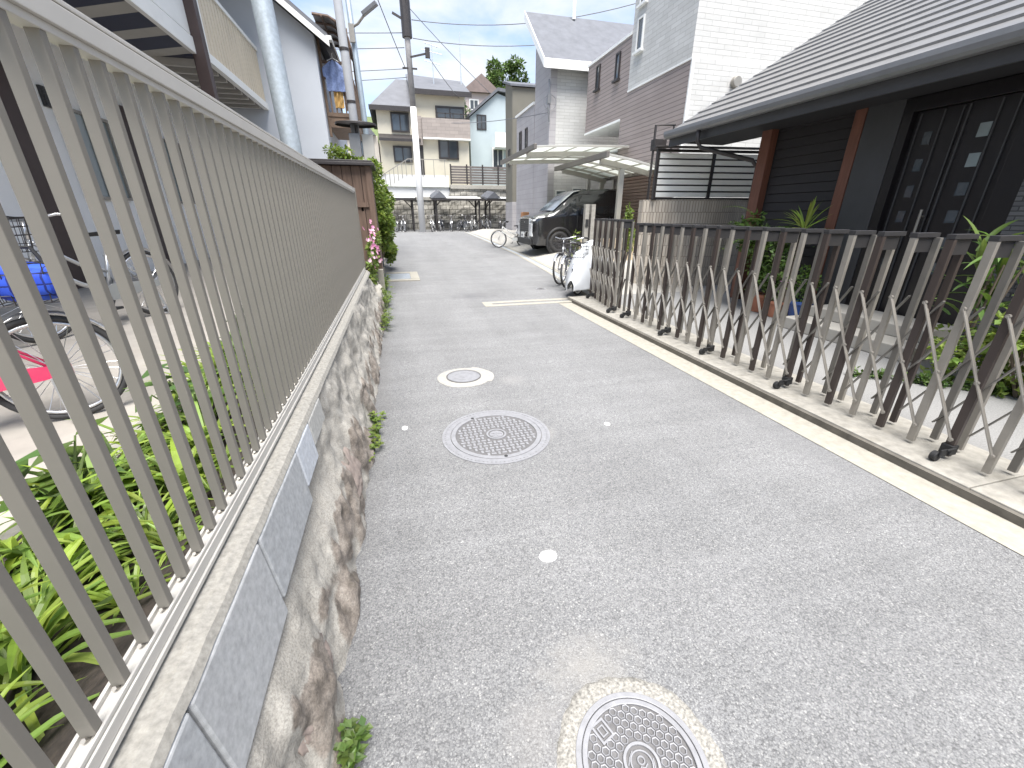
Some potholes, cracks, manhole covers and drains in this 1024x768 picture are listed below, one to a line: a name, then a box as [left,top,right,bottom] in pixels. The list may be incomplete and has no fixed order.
manhole cover [437,367,494,388]
manhole cover [442,410,550,465]
manhole cover [556,677,728,768]
